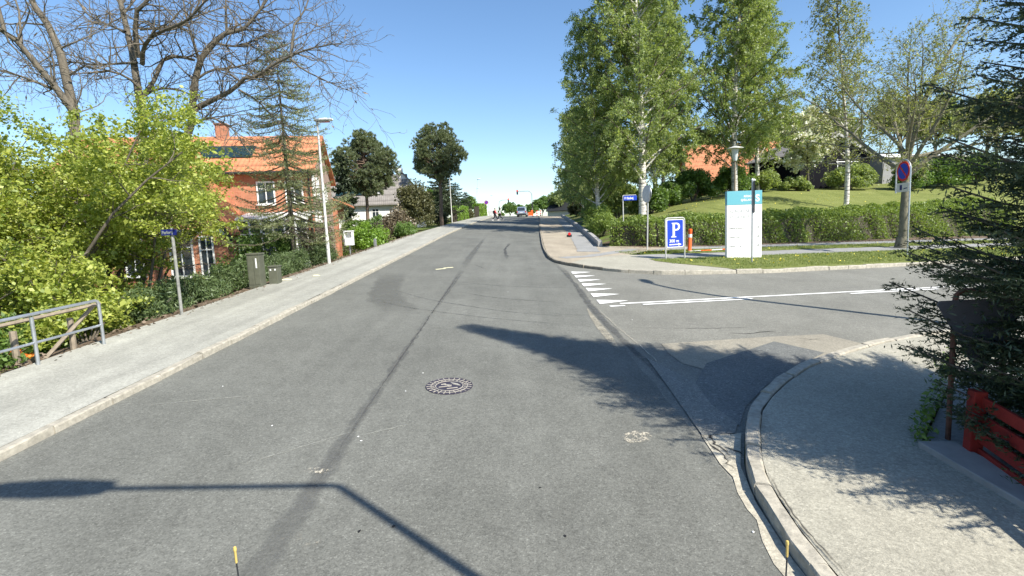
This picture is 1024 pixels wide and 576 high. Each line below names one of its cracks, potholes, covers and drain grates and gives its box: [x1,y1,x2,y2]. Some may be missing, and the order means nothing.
manhole cover [426,378,473,395]
